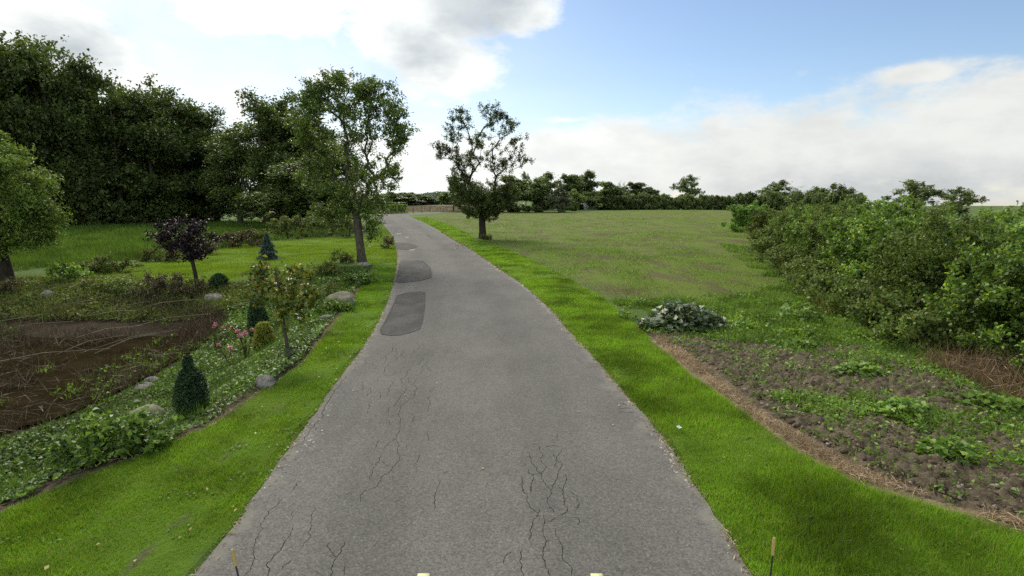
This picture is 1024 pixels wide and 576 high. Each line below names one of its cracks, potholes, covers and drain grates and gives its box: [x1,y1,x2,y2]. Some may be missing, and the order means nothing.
crack [503,434,580,576]
crack [346,343,447,502]
